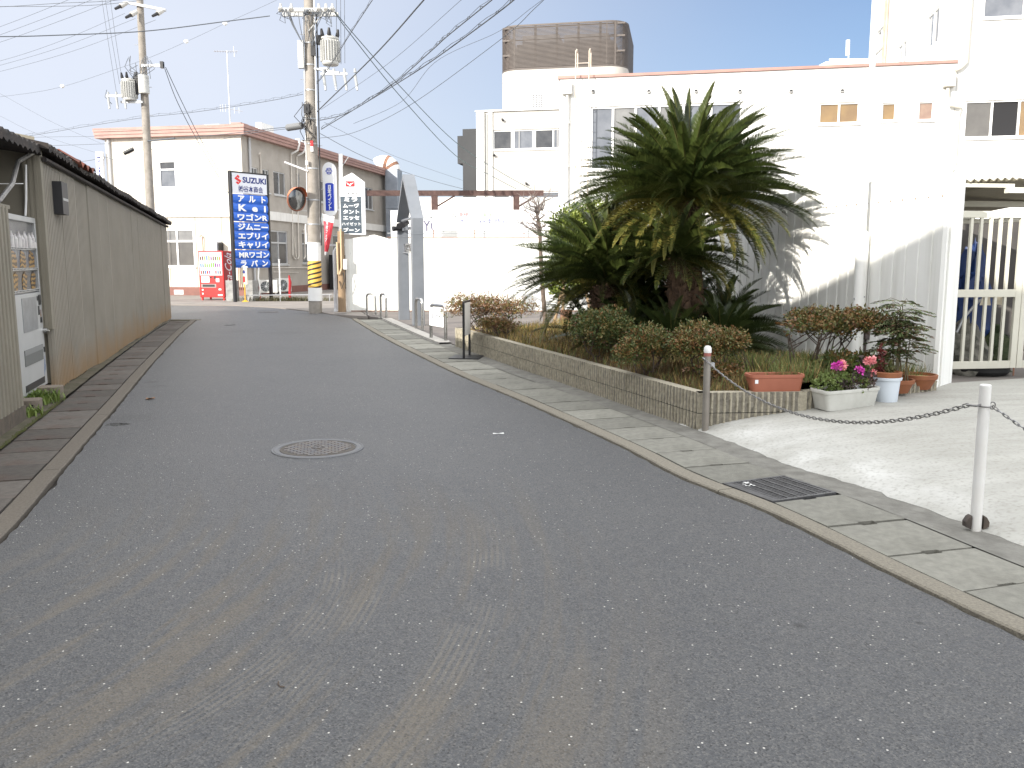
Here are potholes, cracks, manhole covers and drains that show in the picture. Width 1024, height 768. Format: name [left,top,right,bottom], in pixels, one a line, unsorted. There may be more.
manhole cover [271,439,364,459]
drain grate [722,475,837,504]
